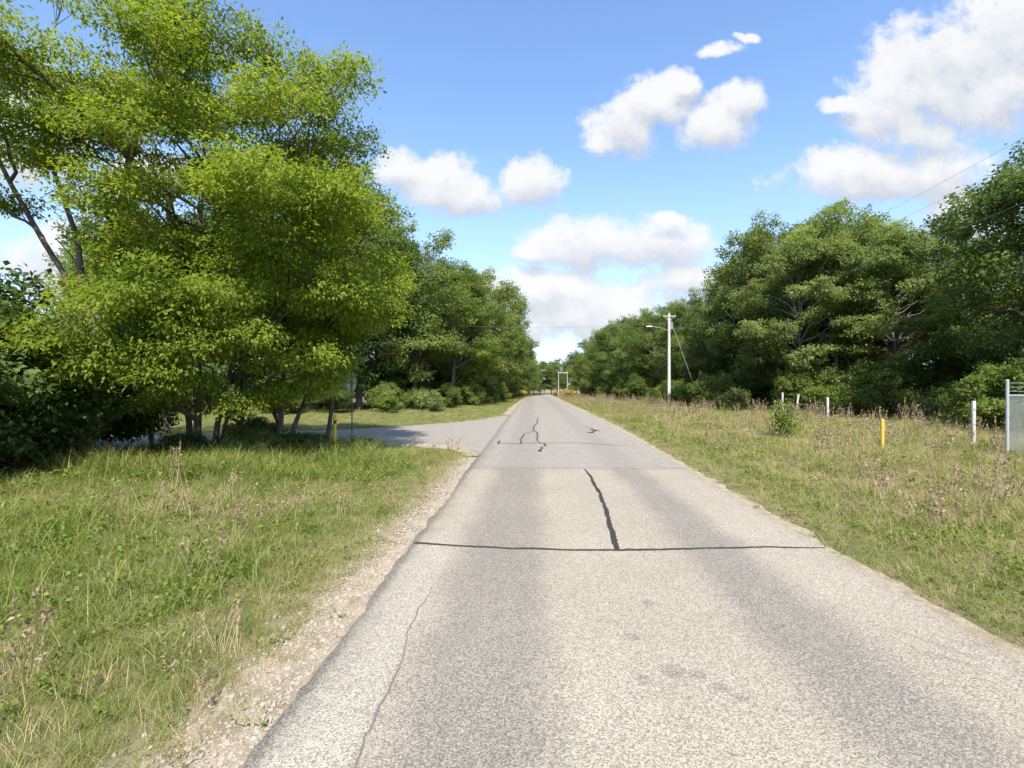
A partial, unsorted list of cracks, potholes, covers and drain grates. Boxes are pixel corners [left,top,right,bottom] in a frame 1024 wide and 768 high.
crack [497,418,626,451]
crack [354,584,434,768]
